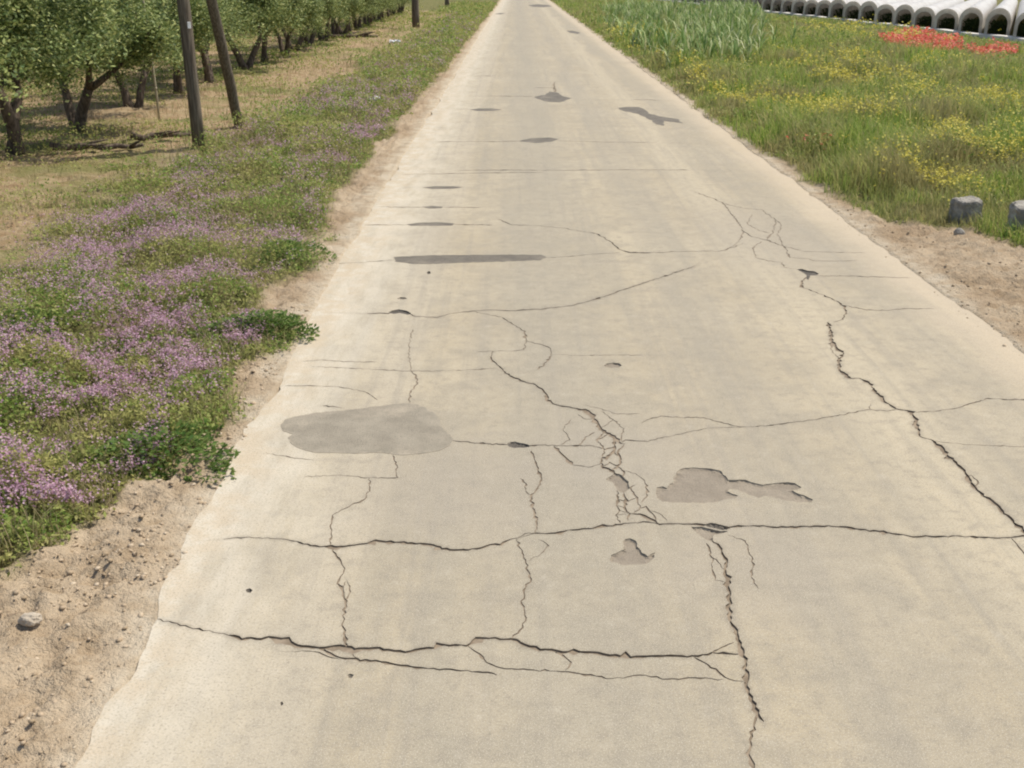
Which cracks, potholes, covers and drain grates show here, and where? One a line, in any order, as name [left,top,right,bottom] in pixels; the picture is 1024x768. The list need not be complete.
pothole [656,467,813,503]
pothole [610,538,654,565]
crack [160,192,1024,768]
